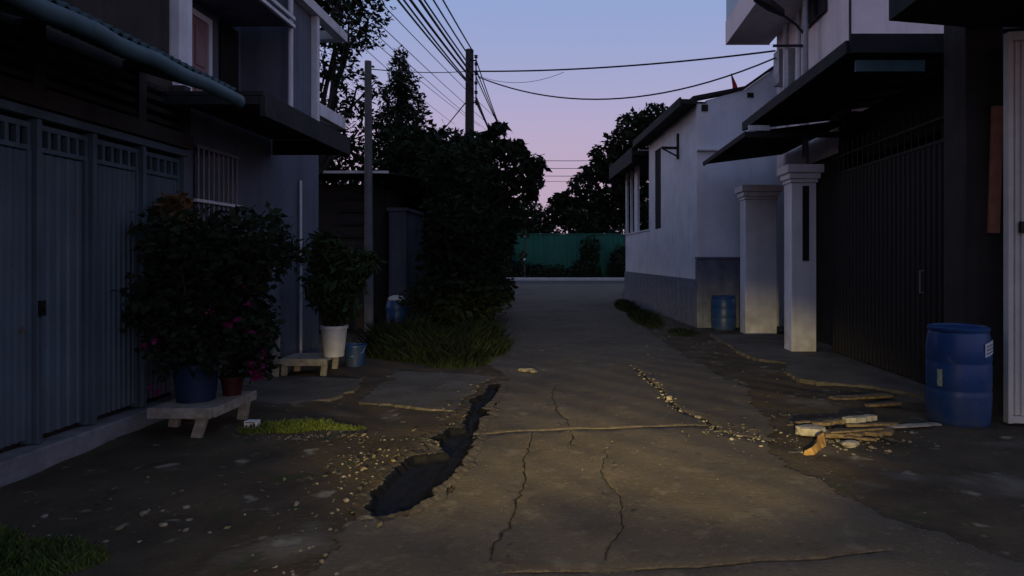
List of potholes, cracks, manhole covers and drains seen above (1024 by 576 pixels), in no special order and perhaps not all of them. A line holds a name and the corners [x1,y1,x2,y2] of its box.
crack [470,365,906,576]
pothole [348,381,509,522]
